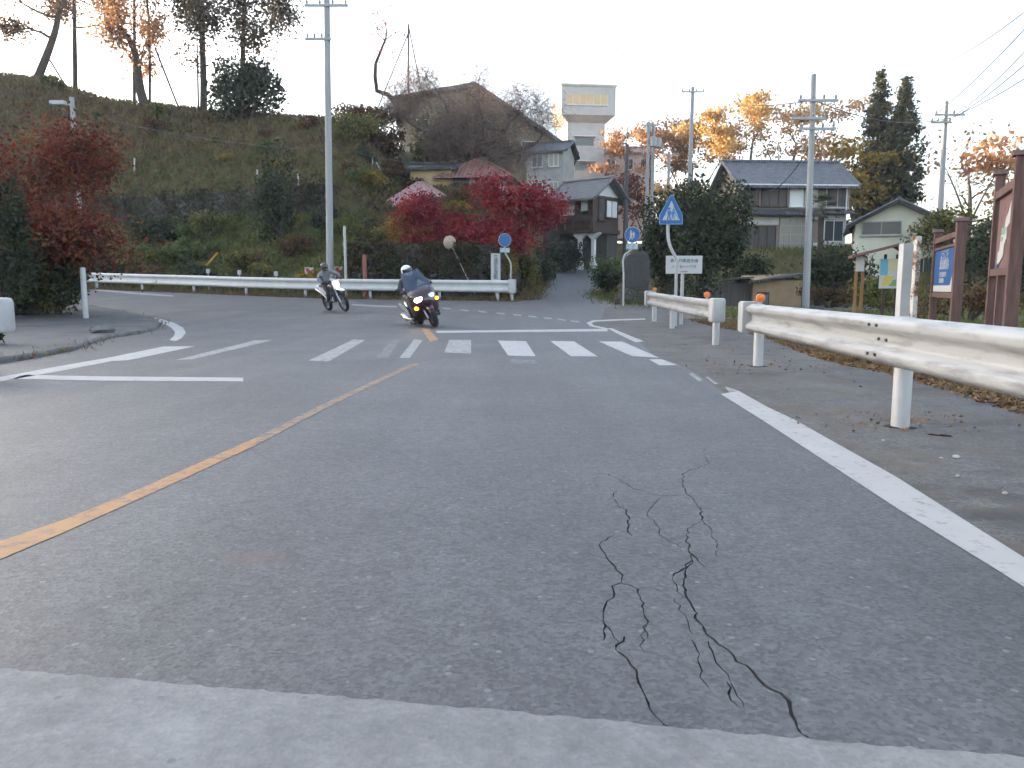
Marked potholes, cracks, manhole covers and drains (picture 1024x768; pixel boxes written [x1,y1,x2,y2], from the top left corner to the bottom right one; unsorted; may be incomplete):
crack [599,456,809,738]
